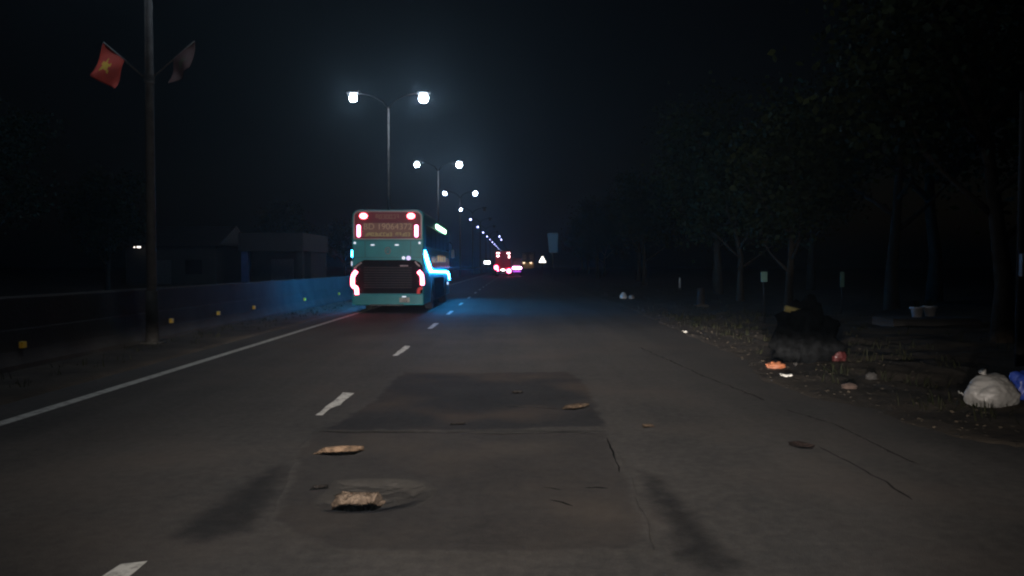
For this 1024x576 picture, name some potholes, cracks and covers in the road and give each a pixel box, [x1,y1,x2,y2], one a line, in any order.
pothole [309,478,438,514]
crack [323,431,620,506]
crack [640,347,764,400]
crack [788,410,921,499]
